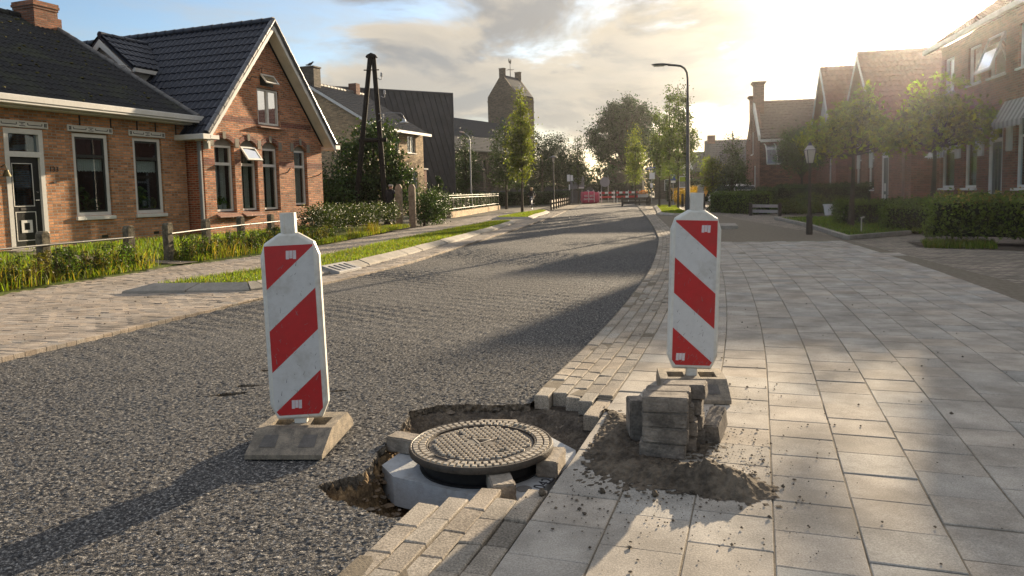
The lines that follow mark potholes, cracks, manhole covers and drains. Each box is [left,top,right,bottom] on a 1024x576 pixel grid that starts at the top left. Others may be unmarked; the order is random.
drain grate [321,262,362,274]
manhole cover [409,420,554,489]
